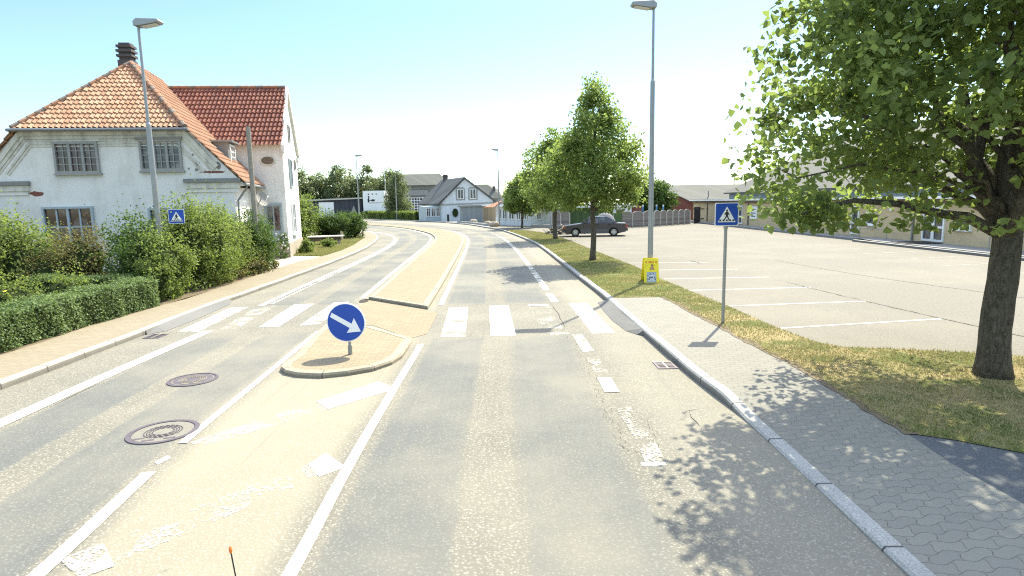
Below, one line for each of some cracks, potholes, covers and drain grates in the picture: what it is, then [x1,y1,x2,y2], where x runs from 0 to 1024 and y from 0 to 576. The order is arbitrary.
drain grate [652,361,678,369]
manhole cover [166,373,219,387]
manhole cover [124,419,200,445]
